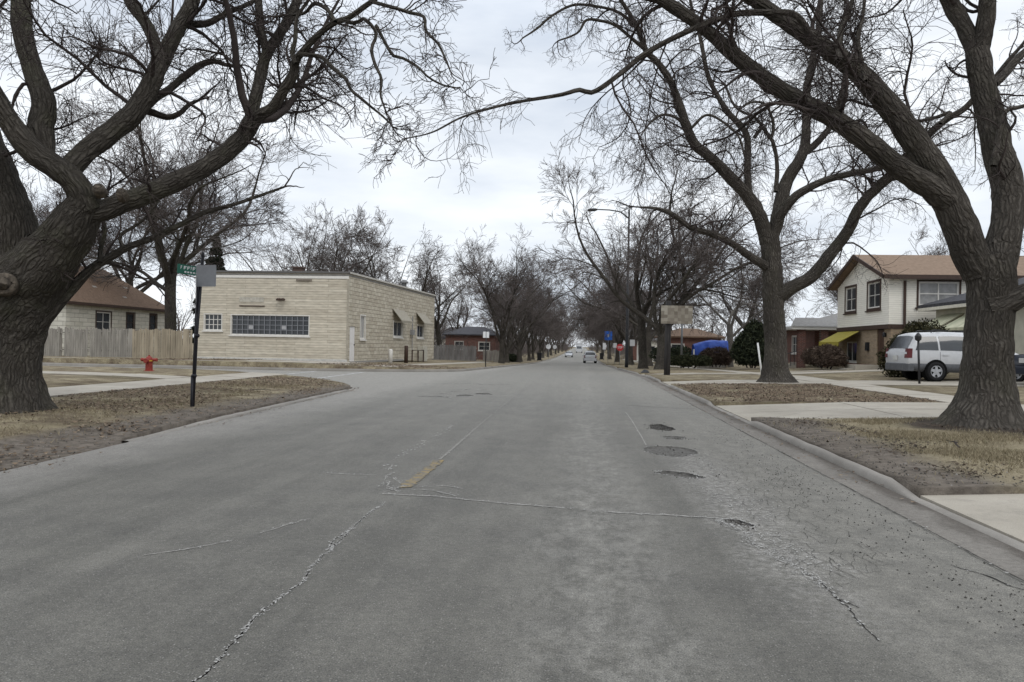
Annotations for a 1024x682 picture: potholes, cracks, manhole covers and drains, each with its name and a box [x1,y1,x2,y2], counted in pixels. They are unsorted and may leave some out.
crack [192,425,891,682]
pothole [718,518,757,527]
pothole [655,470,706,479]
crack [144,518,310,555]
